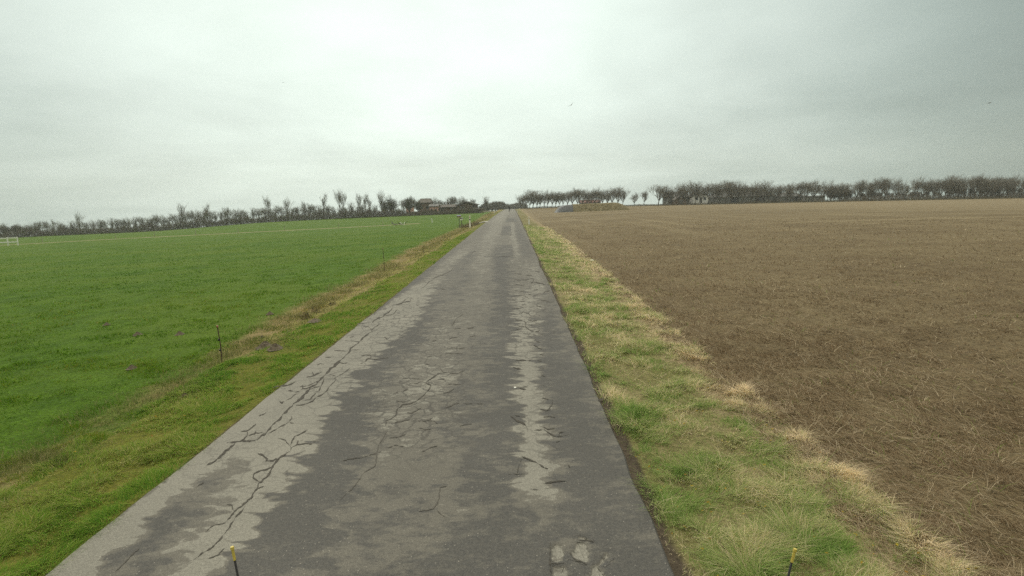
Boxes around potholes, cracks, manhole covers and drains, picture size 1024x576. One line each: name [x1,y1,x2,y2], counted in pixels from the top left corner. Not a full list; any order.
crack [511,271,565,442]
crack [196,271,450,559]
pothole [546,562,576,576]
pothole [545,541,571,566]
crack [510,456,570,490]
crack [339,314,482,501]
pothole [566,539,595,566]
